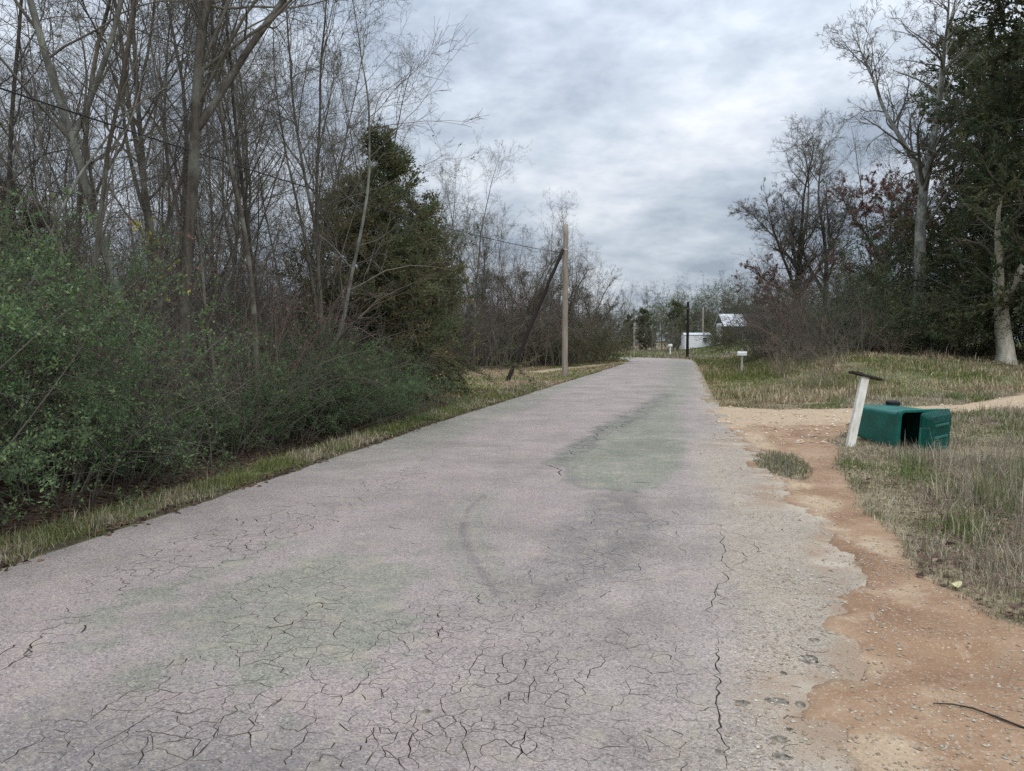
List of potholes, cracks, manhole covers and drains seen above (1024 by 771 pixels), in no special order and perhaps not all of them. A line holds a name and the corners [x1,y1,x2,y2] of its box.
crack [557,523,765,771]
crack [2,576,586,771]
crack [0,466,425,670]
